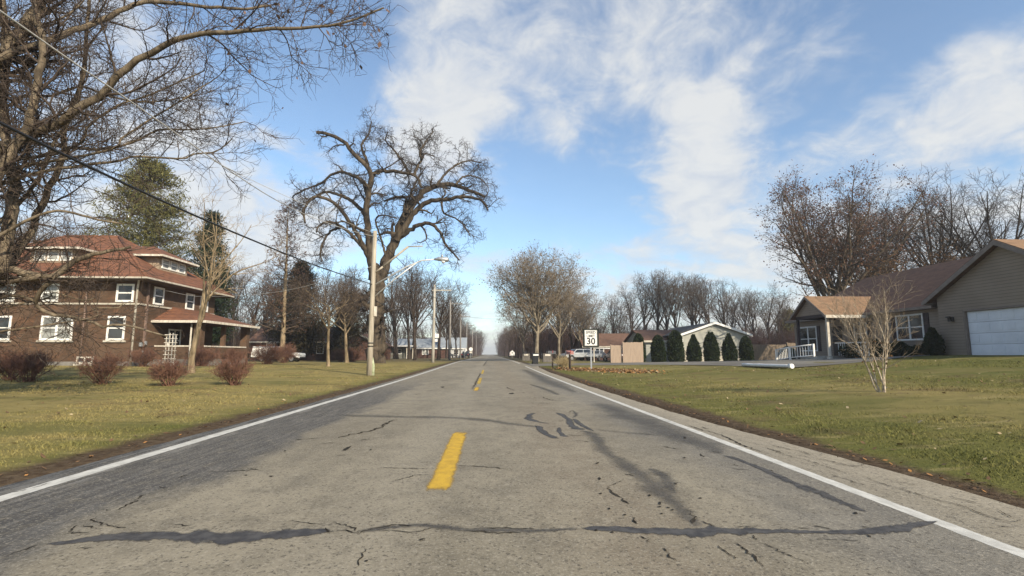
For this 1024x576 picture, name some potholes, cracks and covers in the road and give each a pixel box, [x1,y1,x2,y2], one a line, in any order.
crack [281,520,434,565]
crack [607,474,676,560]
crack [296,420,393,456]
crack [68,474,192,548]
crack [718,526,801,564]
